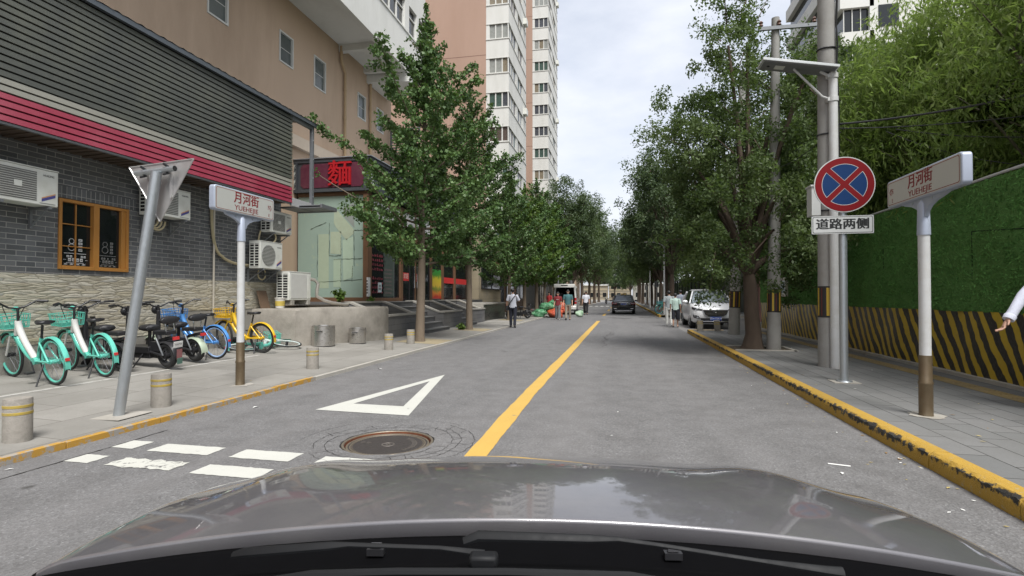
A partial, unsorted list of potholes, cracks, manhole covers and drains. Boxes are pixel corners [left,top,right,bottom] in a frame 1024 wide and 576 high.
manhole cover [341,431,433,455]
